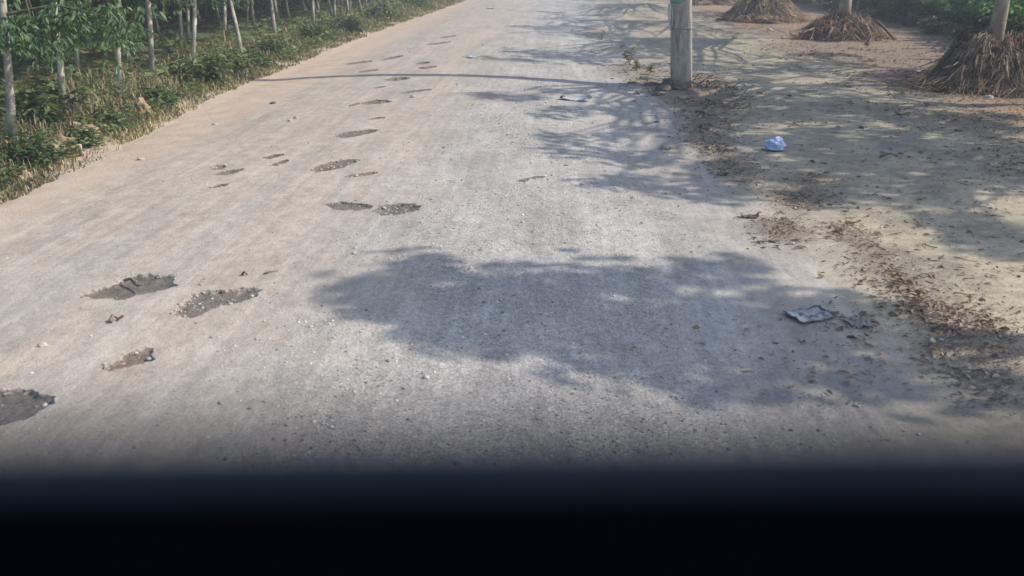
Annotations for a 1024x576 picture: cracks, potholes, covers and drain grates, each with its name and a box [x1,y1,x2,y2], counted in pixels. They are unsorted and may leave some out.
pothole [333,128,380,138]
pothole [98,346,156,371]
pothole [325,201,372,211]
pothole [169,286,263,320]
pothole [0,387,56,421]
pothole [373,202,423,216]
pothole [310,159,360,173]
pothole [79,272,179,301]
